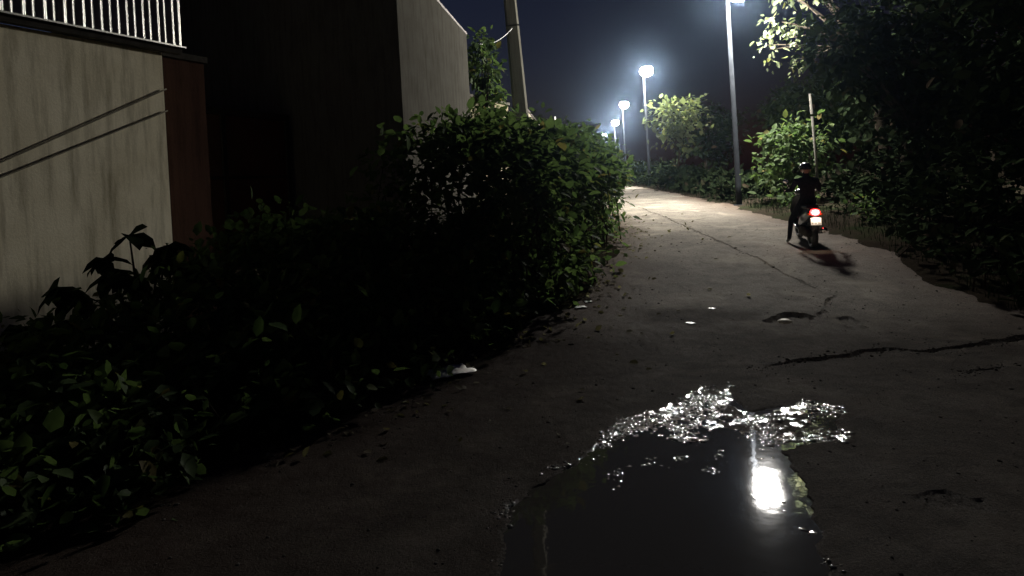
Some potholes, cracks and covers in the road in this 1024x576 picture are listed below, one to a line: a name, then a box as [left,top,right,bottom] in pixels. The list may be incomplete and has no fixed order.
pothole [761,312,816,325]
crack [638,207,837,320]
crack [758,335,1024,375]
